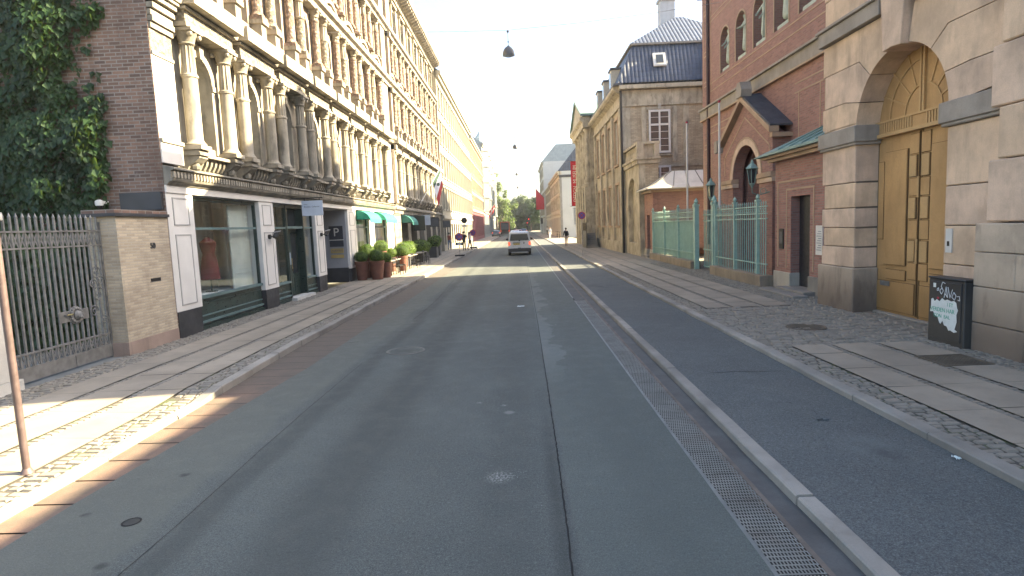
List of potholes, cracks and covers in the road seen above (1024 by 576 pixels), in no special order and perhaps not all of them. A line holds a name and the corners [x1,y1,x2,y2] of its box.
utility cover [121,517,142,527]
manhole cover [386,347,425,355]
